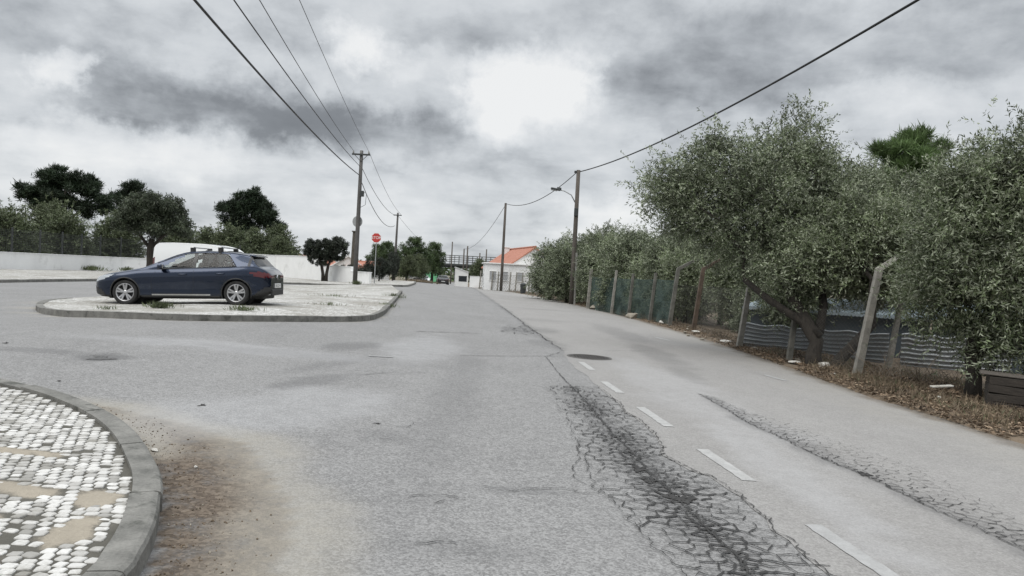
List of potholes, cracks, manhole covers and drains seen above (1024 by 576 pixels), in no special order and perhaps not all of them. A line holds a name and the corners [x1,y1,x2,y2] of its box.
crack [484,352,836,576]
crack [698,393,1024,549]
